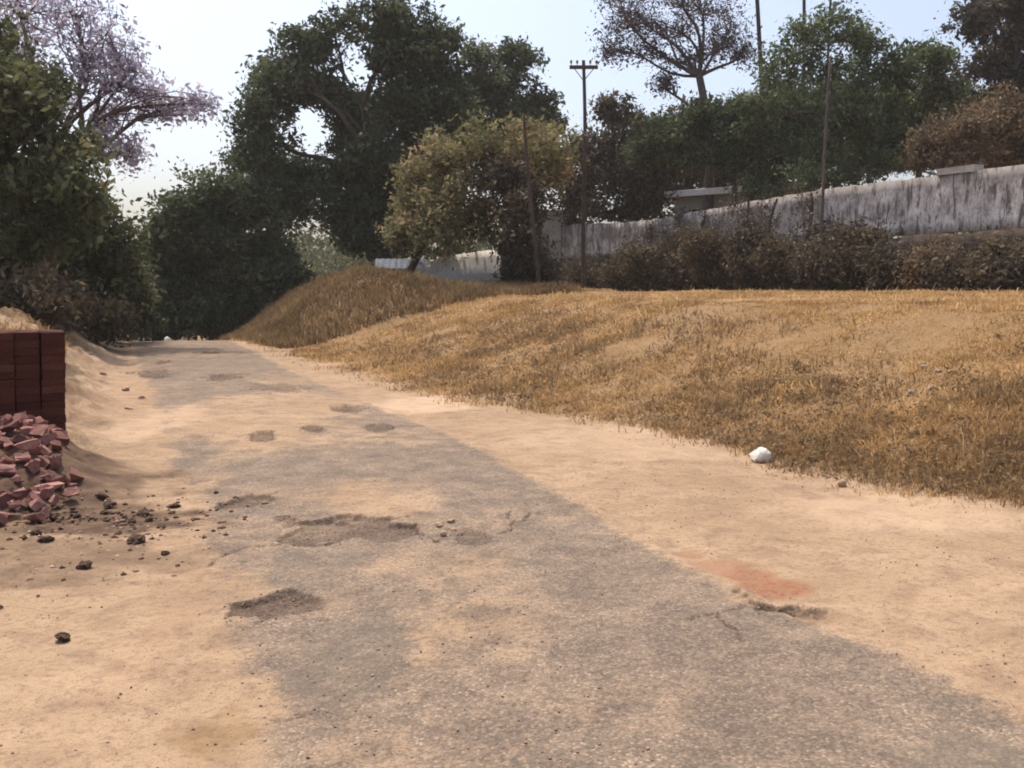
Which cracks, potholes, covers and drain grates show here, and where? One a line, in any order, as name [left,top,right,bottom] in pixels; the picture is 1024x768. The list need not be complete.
crack [498,510,534,535]
pothole [451,526,499,548]
pothole [327,403,377,413]
pothole [211,490,285,512]
pothole [727,587,834,622]
pothole [297,423,330,433]
pothole [358,422,398,433]
pothole [246,430,280,443]
pothole [221,587,331,622]
pothole [273,512,452,548]
crack [687,604,748,642]
